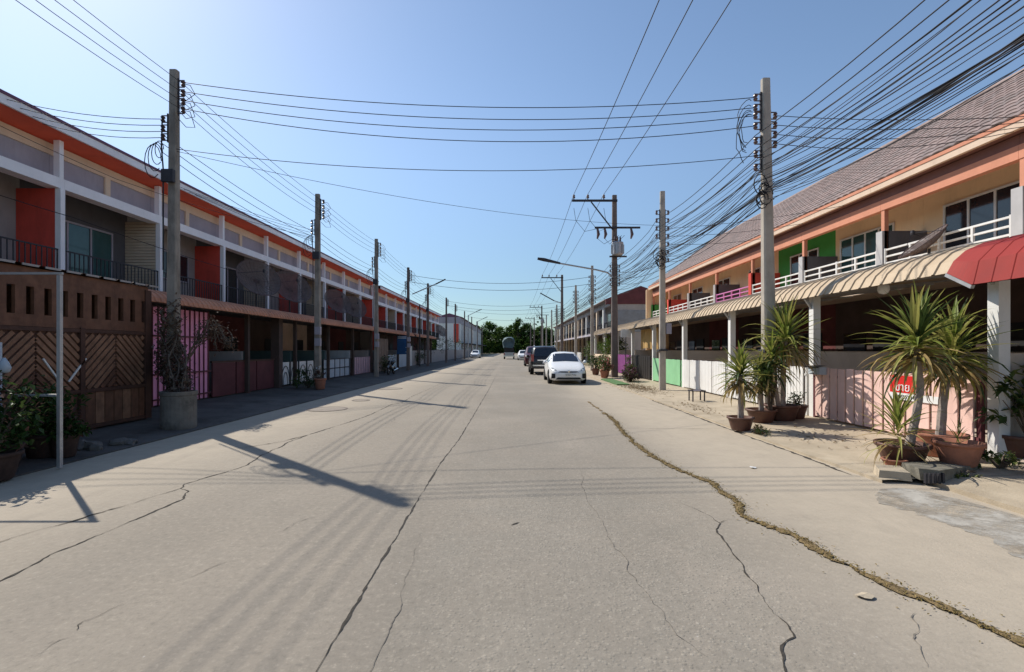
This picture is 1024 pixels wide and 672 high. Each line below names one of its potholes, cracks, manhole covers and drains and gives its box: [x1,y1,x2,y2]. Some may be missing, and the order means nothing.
crack [581,400,1024,672]
crack [0,396,412,581]
